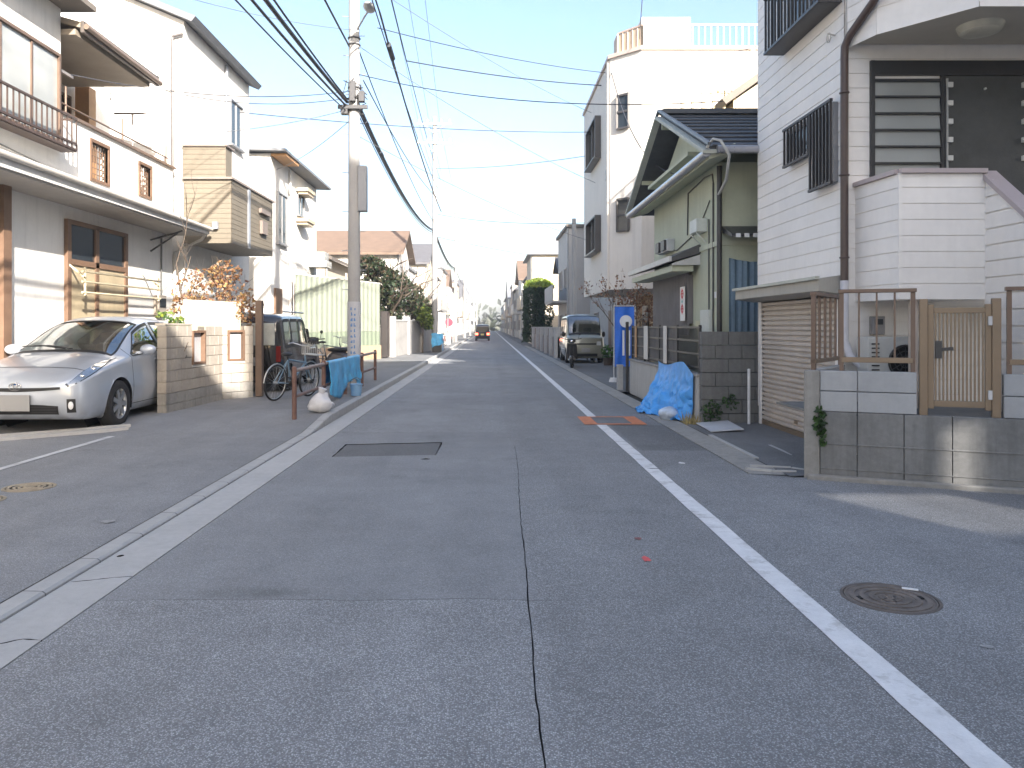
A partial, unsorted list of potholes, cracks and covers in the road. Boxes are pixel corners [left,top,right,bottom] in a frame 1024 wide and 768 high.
manhole cover [1,482,57,492]
manhole cover [840,582,943,615]
crack [515,450,546,768]
